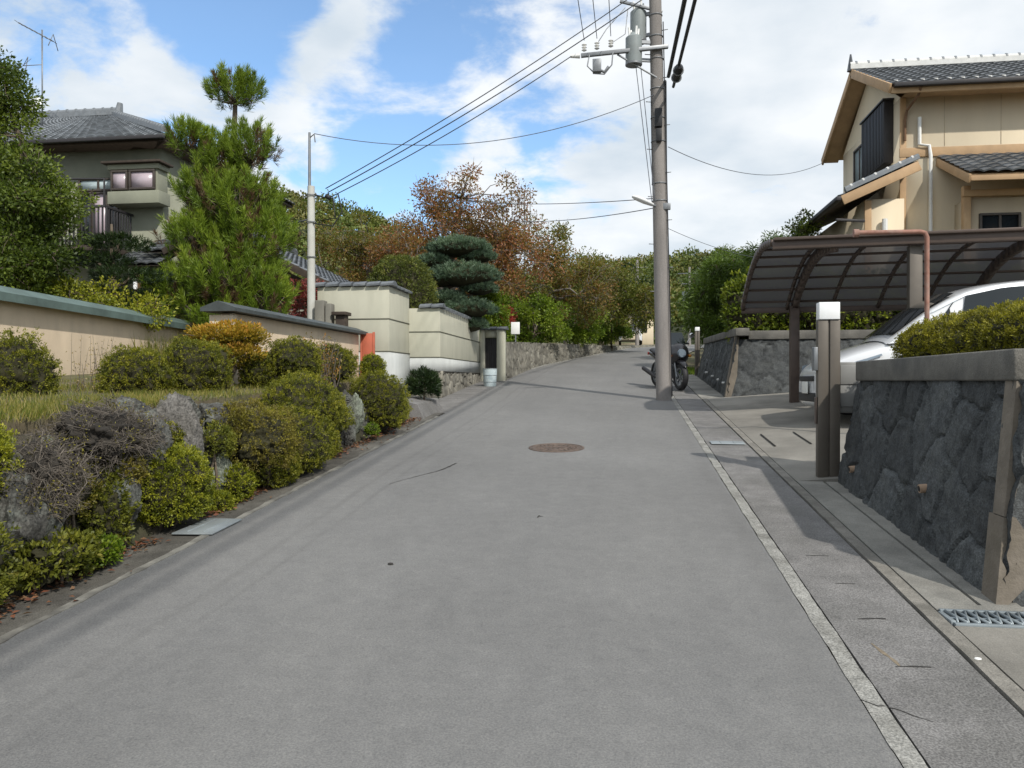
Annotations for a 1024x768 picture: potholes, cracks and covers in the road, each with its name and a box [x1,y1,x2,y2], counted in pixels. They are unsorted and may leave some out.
manhole cover [529,443,584,452]
drain grate [938,608,1024,629]
